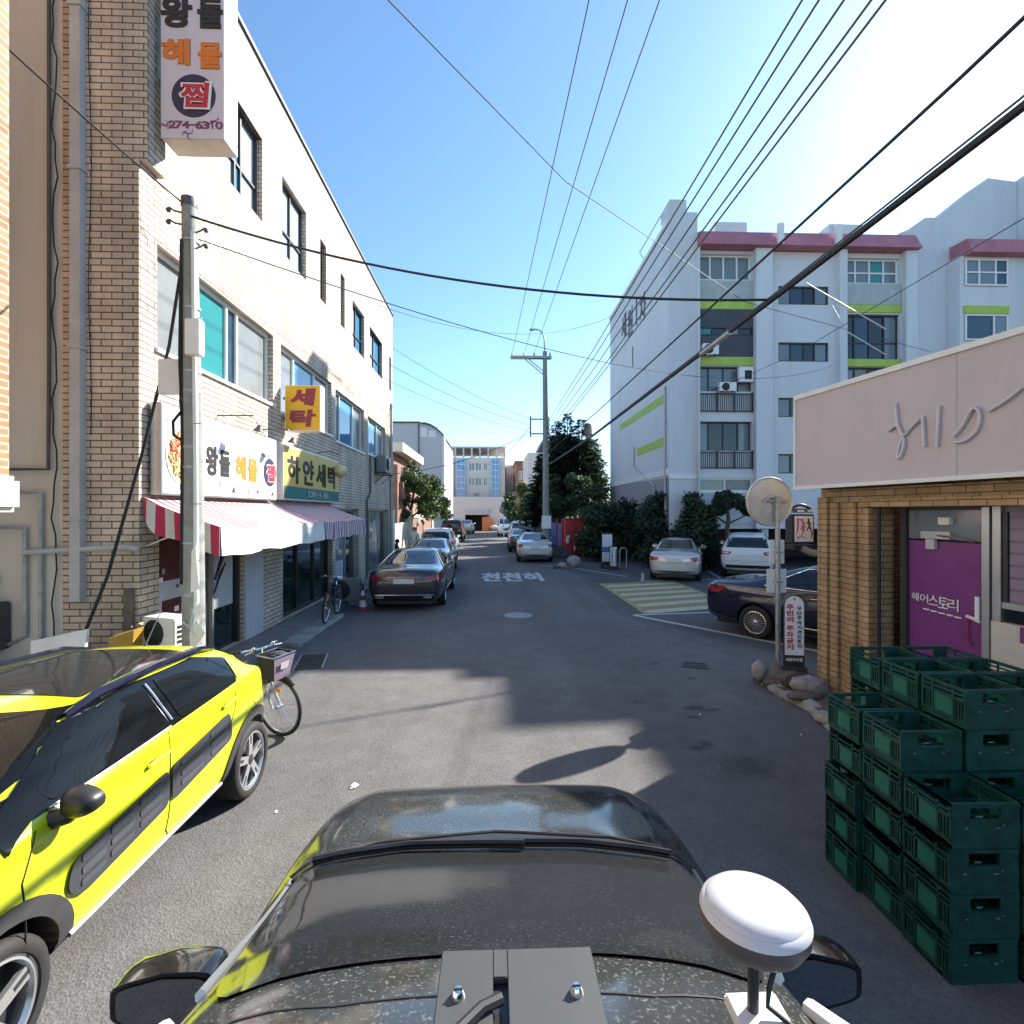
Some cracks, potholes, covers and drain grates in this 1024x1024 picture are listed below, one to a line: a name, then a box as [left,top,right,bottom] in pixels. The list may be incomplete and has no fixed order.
drain grate [682,660,708,669]
drain grate [292,653,329,671]
